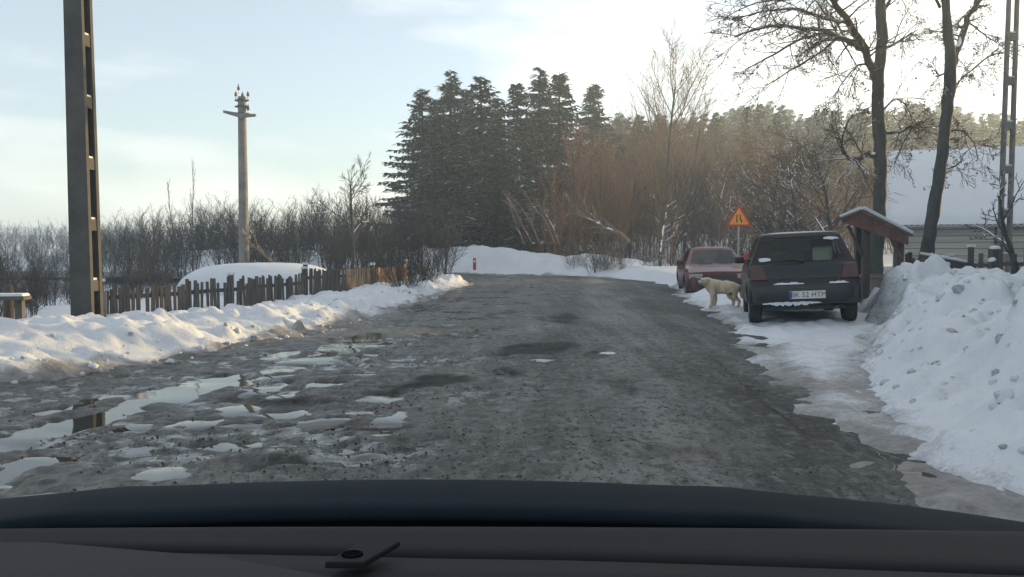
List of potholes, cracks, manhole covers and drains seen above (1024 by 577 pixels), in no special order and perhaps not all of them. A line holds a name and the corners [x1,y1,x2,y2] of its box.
pothole [507,342,567,356]
pothole [543,315,574,324]
pothole [414,376,459,389]
